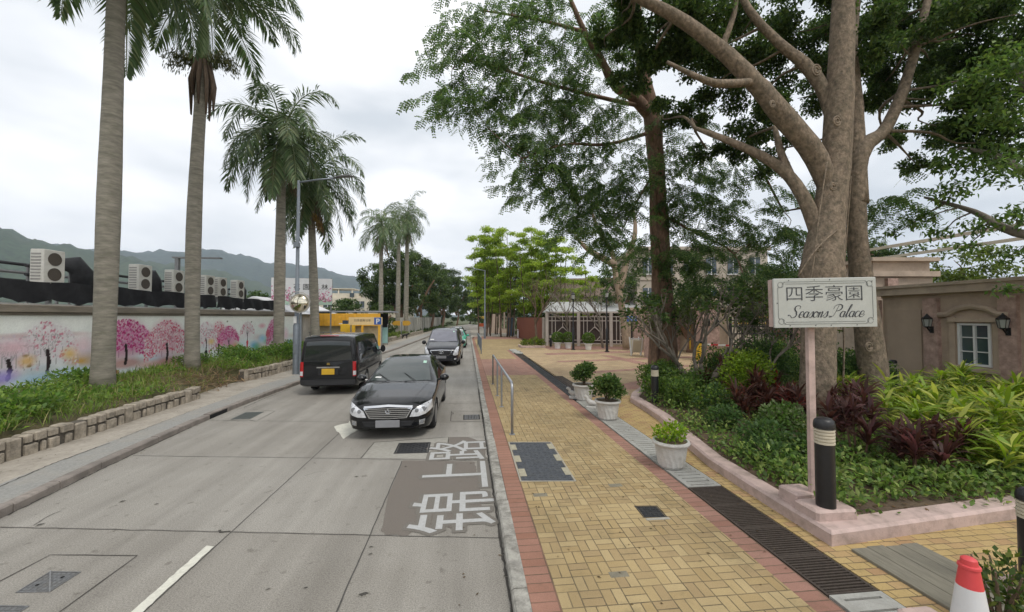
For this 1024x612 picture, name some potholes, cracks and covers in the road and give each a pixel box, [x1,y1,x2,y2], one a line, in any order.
manhole cover [635,506,667,517]
drain grate [778,554,879,598]
drain grate [688,486,748,507]
drain grate [712,504,781,530]
drain grate [203,407,227,419]
manhole cover [15,570,81,593]
manhole cover [394,442,431,454]
drain grate [741,526,823,558]
